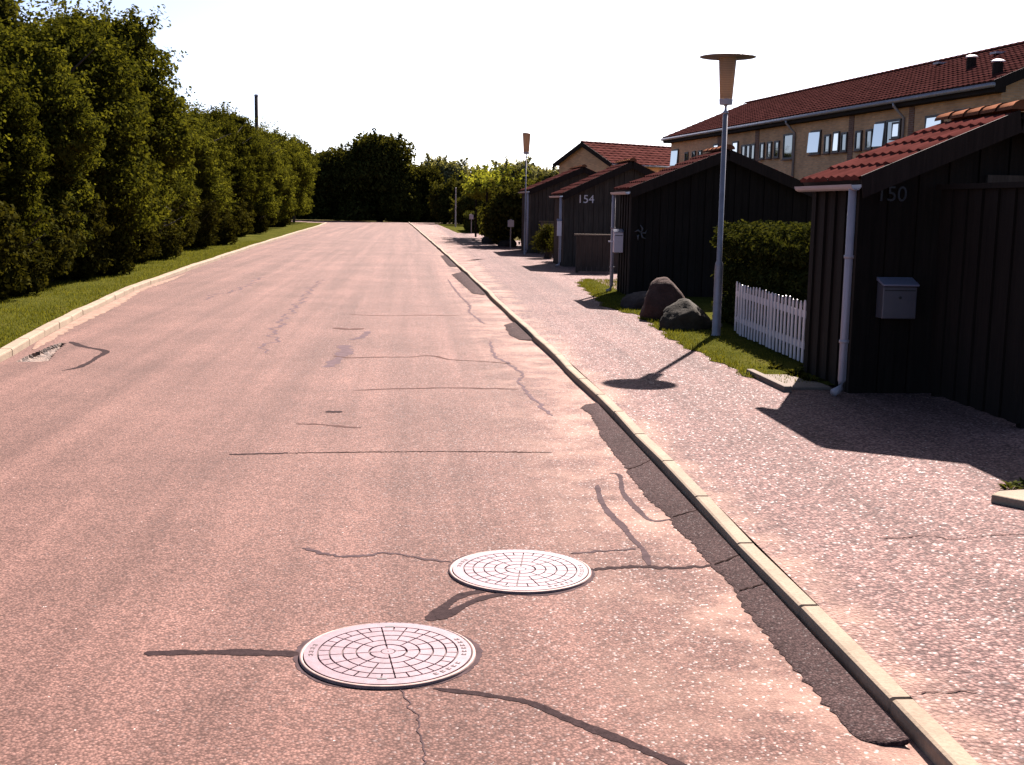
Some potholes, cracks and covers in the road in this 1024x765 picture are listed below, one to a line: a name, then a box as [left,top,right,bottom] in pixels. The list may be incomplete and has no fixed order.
crack [399,689,427,765]
manhole cover [447,549,595,596]
crack [302,548,451,562]
crack [336,341,553,416]
manhole cover [293,622,483,690]
crack [572,548,740,571]
